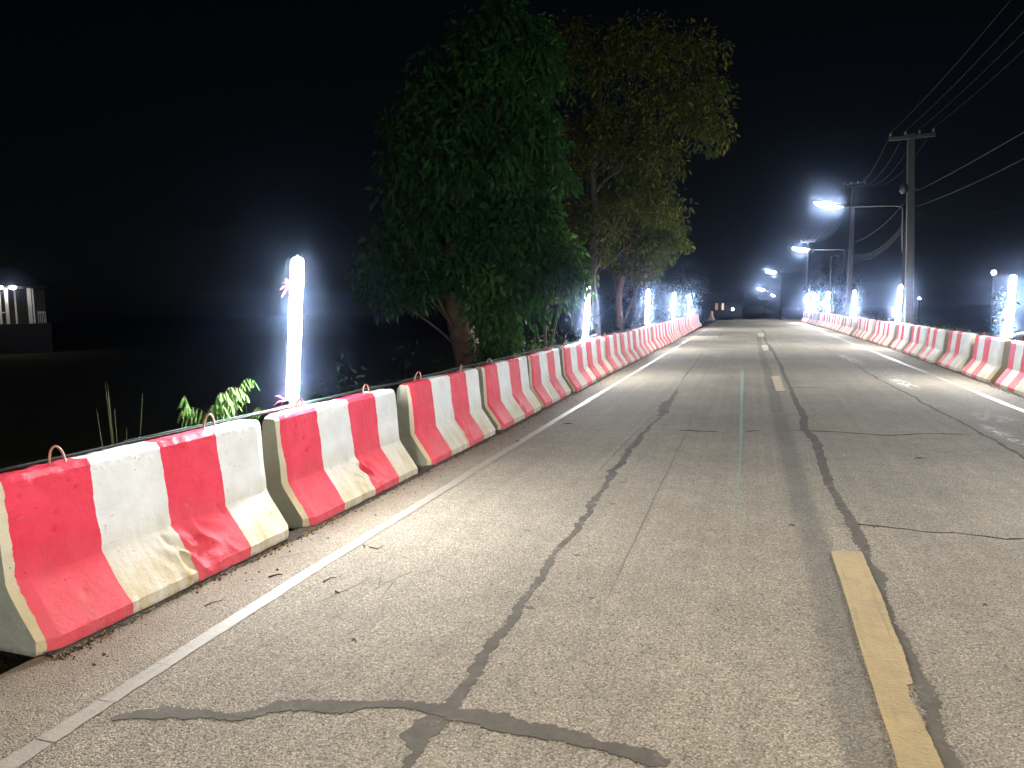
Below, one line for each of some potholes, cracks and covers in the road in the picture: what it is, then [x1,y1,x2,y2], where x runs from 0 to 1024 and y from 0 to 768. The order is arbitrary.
crack [803,335,1024,459]
crack [592,407,718,629]
